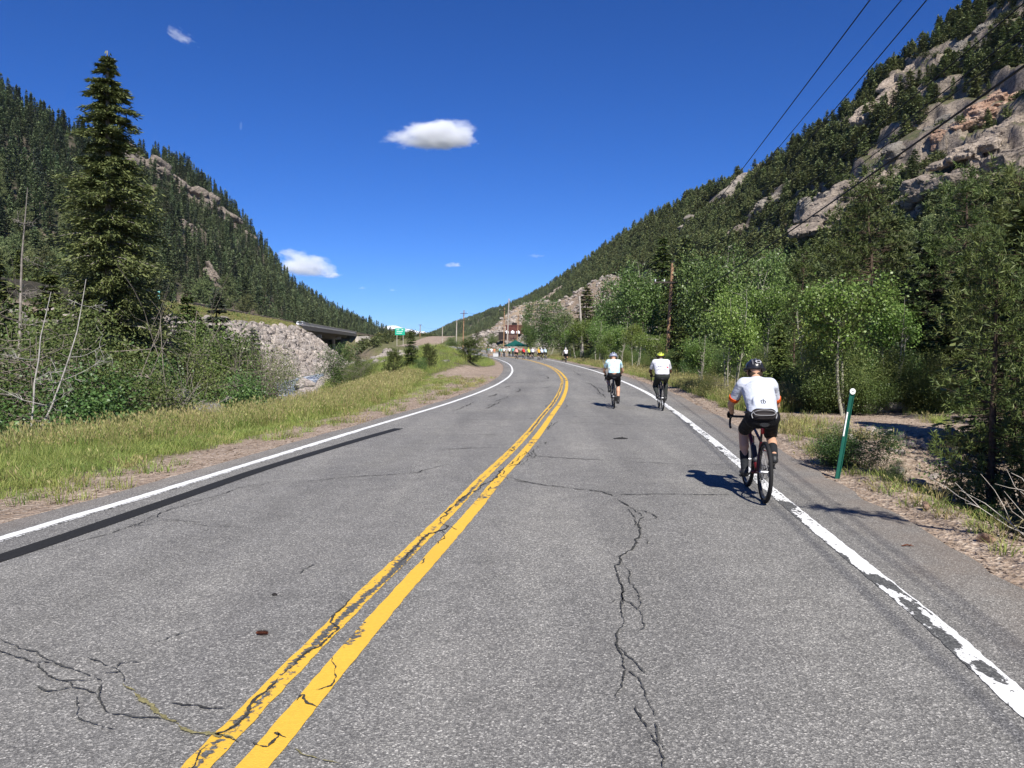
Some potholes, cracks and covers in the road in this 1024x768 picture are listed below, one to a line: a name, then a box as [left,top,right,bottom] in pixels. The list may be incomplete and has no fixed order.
crack [0,372,713,768]
